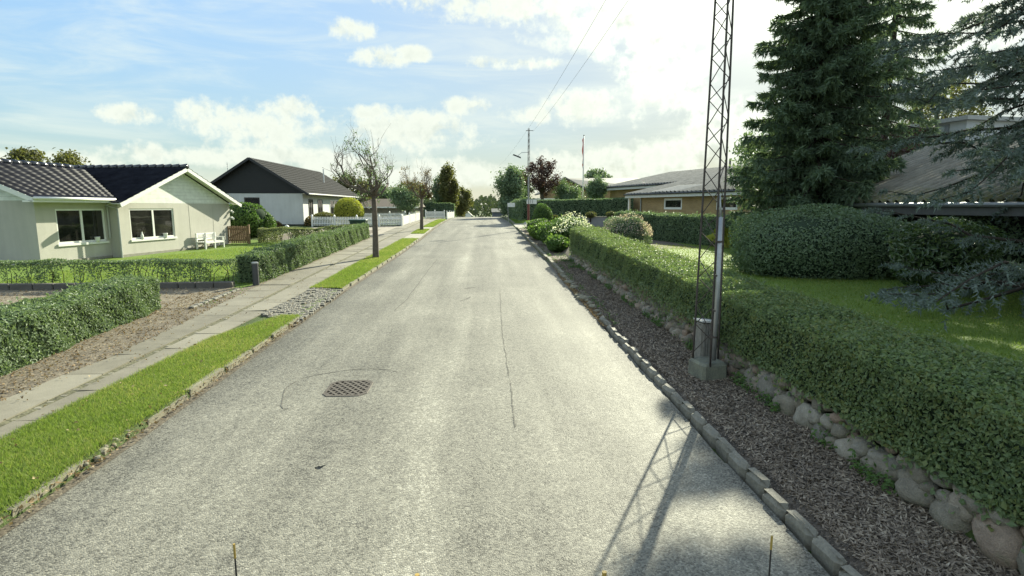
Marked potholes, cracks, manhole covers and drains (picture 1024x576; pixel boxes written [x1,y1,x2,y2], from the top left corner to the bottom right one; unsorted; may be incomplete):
crack [280,368,397,409]
